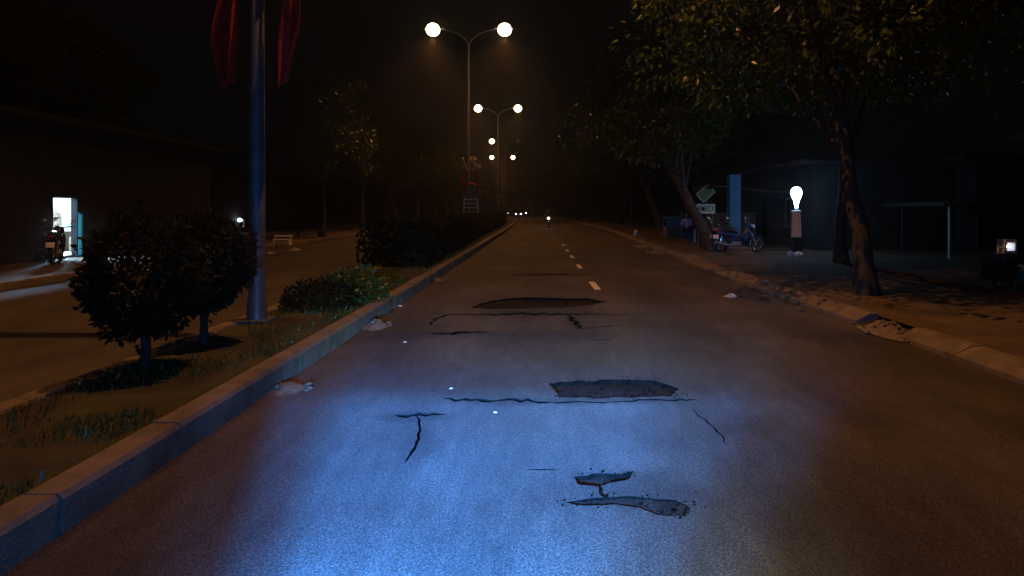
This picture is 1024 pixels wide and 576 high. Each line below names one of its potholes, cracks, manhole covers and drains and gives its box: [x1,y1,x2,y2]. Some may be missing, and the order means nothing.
crack [395,398,727,463]
pothole [539,376,687,400]
pothole [472,297,607,310]
crack [430,312,619,340]
pothole [557,466,706,519]
